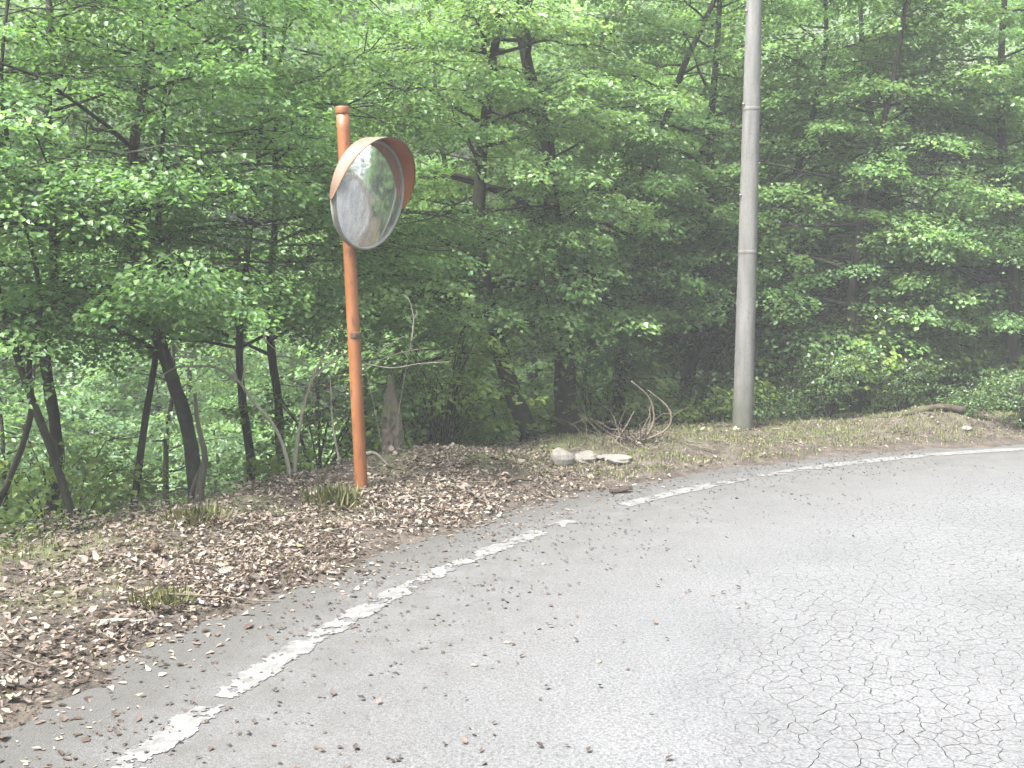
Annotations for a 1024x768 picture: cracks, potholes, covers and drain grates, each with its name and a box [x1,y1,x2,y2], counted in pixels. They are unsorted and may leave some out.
crack [649,473,1024,768]
